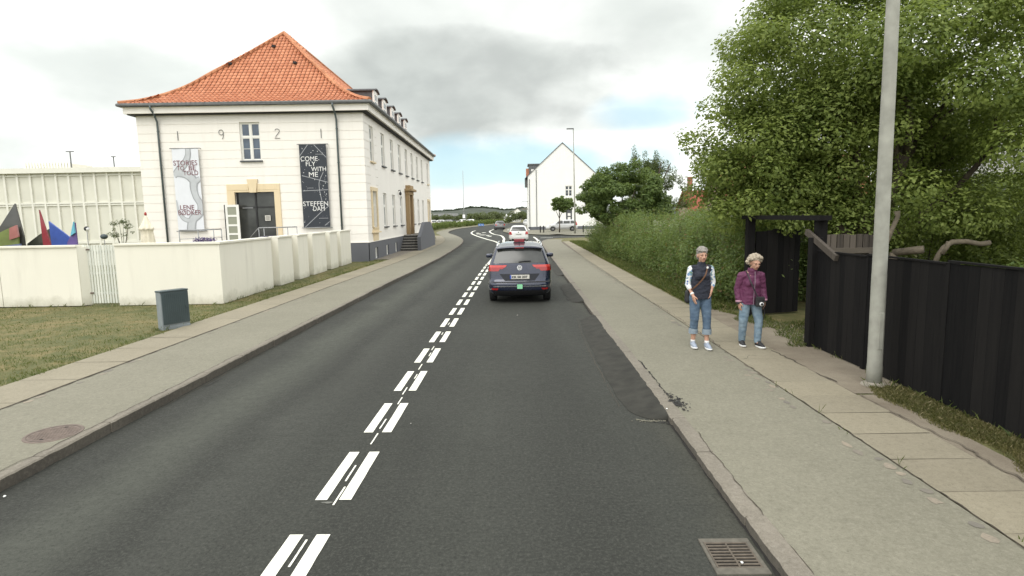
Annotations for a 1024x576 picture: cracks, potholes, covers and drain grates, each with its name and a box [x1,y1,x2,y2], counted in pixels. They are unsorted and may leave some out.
manhole cover [21,424,85,444]
drain grate [698,538,772,576]
